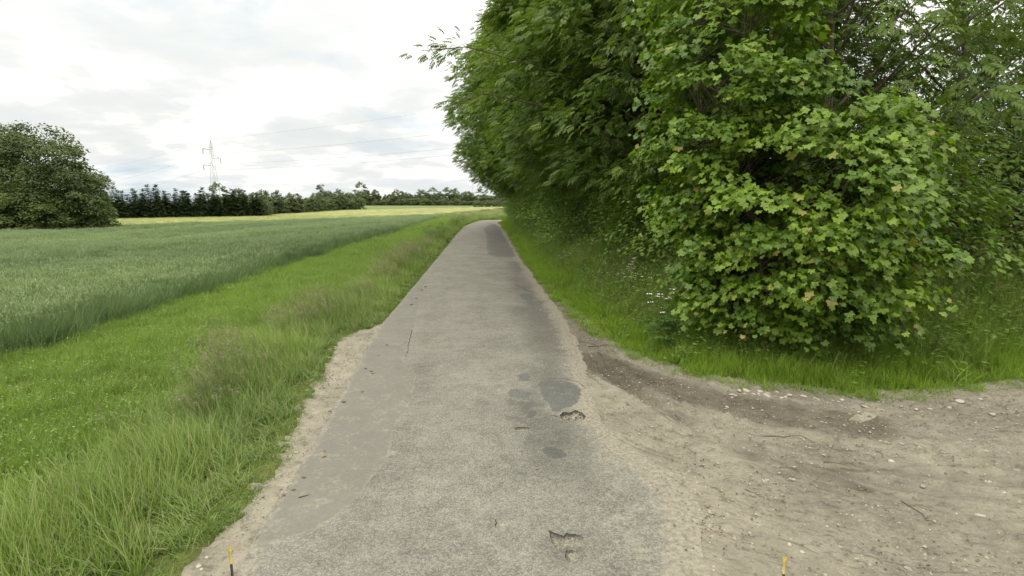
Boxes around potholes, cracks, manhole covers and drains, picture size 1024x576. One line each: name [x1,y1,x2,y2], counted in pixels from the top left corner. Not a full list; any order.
pothole [549,531,586,549]
pothole [565,550,583,564]
pothole [559,410,586,421]
